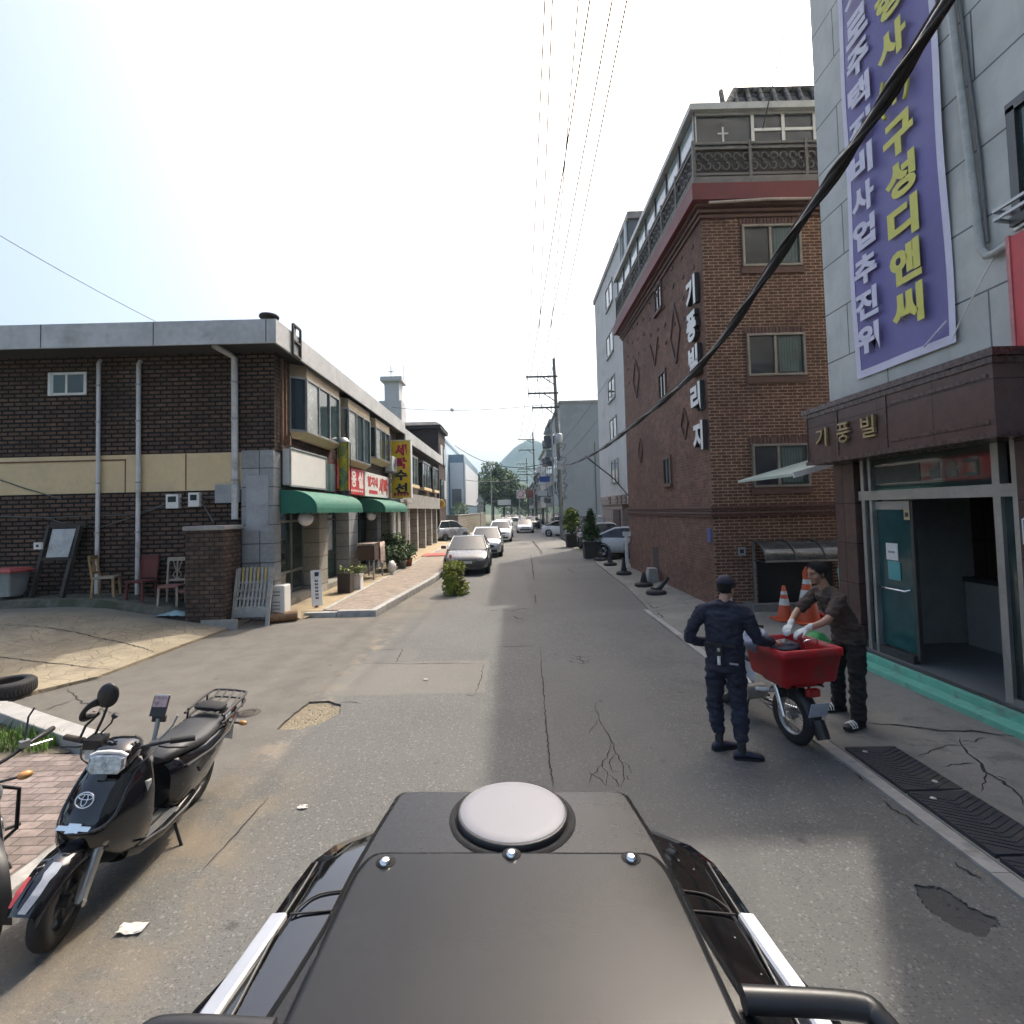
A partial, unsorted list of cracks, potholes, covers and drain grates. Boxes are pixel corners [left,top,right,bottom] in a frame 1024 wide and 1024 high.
crack [589,705,631,787]
crack [353,649,484,696]
crack [874,723,1023,804]
pothole [914,884,1001,937]
pothole [277,701,341,730]
